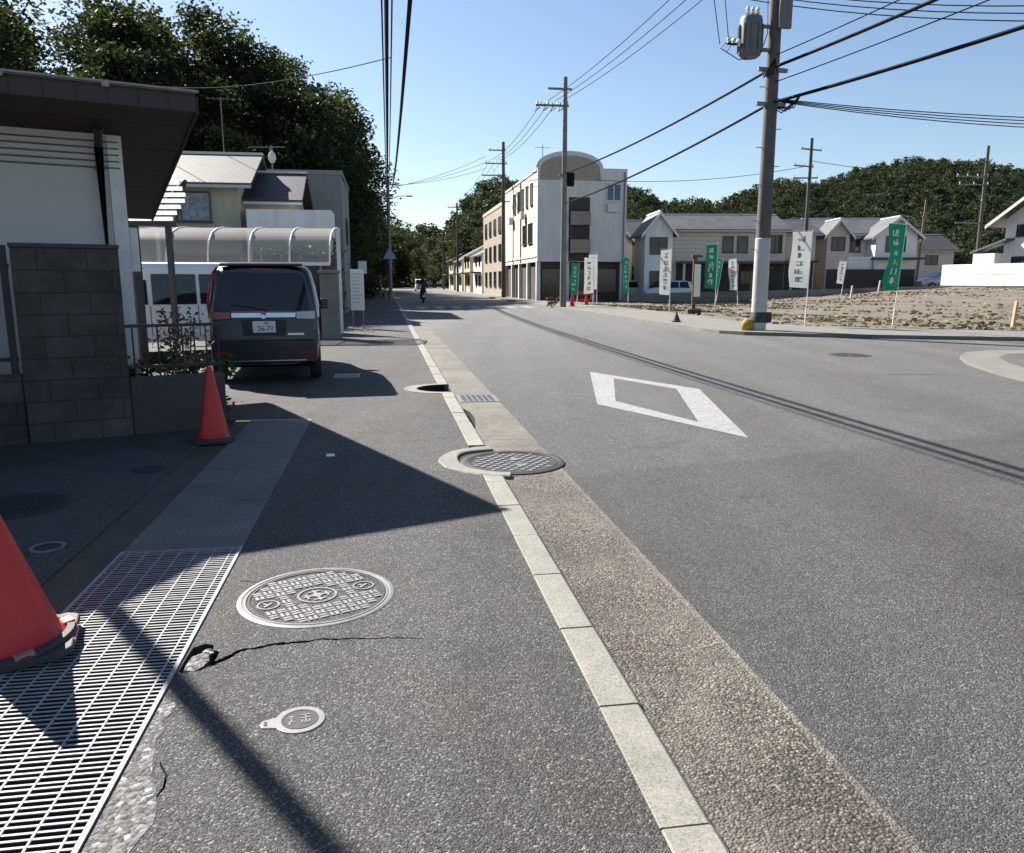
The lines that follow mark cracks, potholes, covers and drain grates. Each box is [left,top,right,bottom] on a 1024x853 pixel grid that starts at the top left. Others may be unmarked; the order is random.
manhole cover [461,451,565,475]
drain grate [456,394,500,402]
crack [213,637,421,665]
utility cover [28,541,66,553]
utility cover [131,465,166,473]
pothole [179,644,220,674]
crack [156,761,168,799]
utility cover [260,706,325,734]
manhole cover [237,568,394,629]
manhole cover [0,493,71,520]
drain grate [0,546,243,853]
